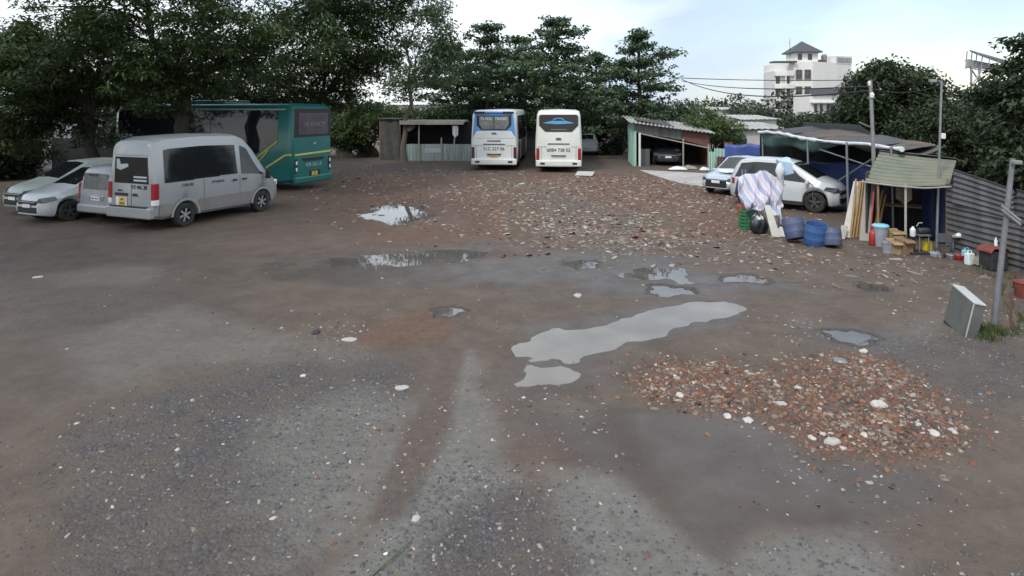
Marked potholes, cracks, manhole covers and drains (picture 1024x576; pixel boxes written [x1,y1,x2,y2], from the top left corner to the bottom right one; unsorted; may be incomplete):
pothole [560,260,603,270]
pothole [853,281,894,293]
pothole [719,273,777,286]
pothole [814,327,887,348]
pothole [430,305,471,318]
